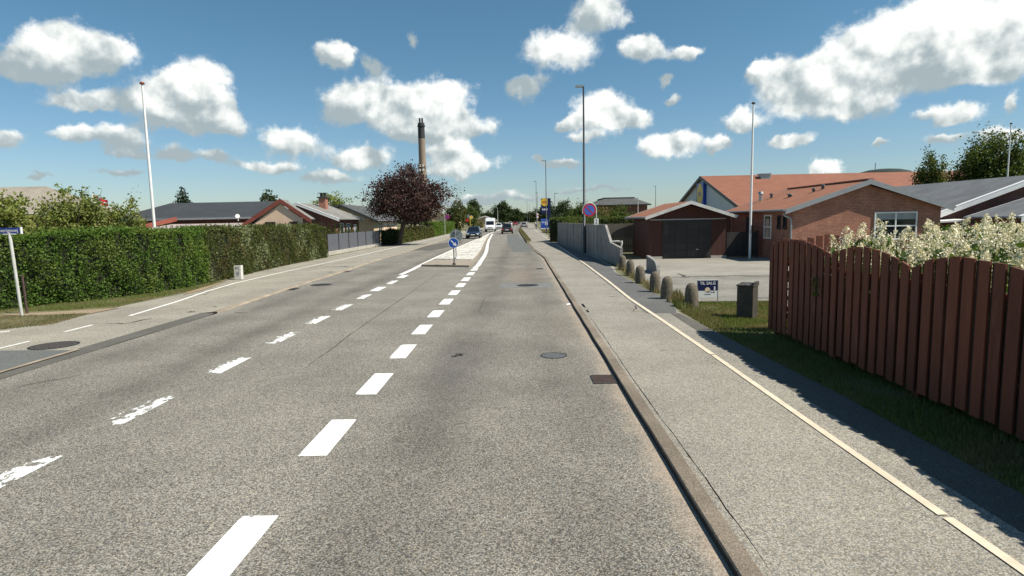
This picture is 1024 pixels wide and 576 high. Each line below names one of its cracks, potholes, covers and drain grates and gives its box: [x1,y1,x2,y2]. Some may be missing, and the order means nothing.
manhole cover [27,341,80,350]
crack [304,275,436,369]
